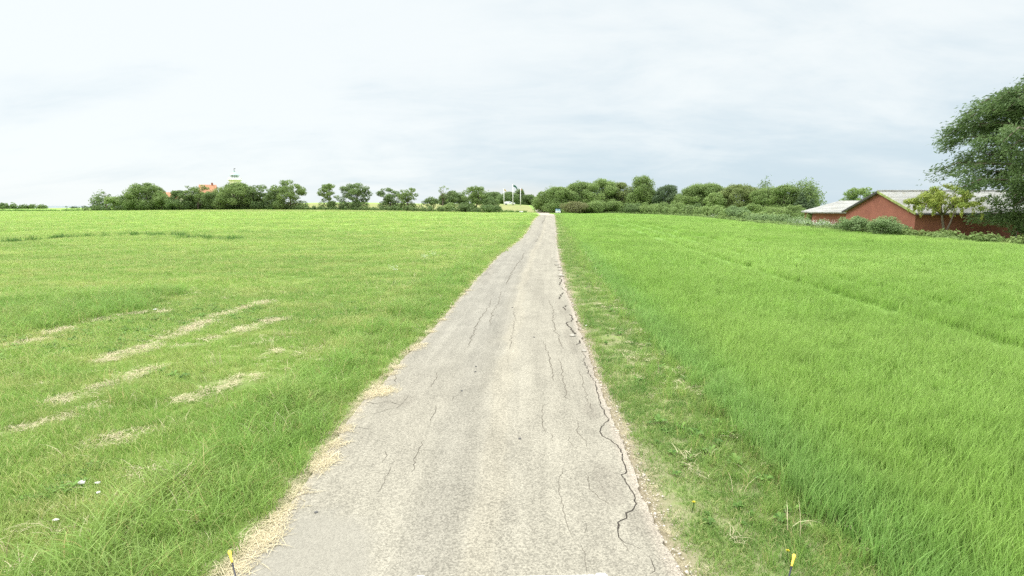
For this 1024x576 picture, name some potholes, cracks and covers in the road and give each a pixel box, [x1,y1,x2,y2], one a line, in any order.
crack [541,264,655,574]
